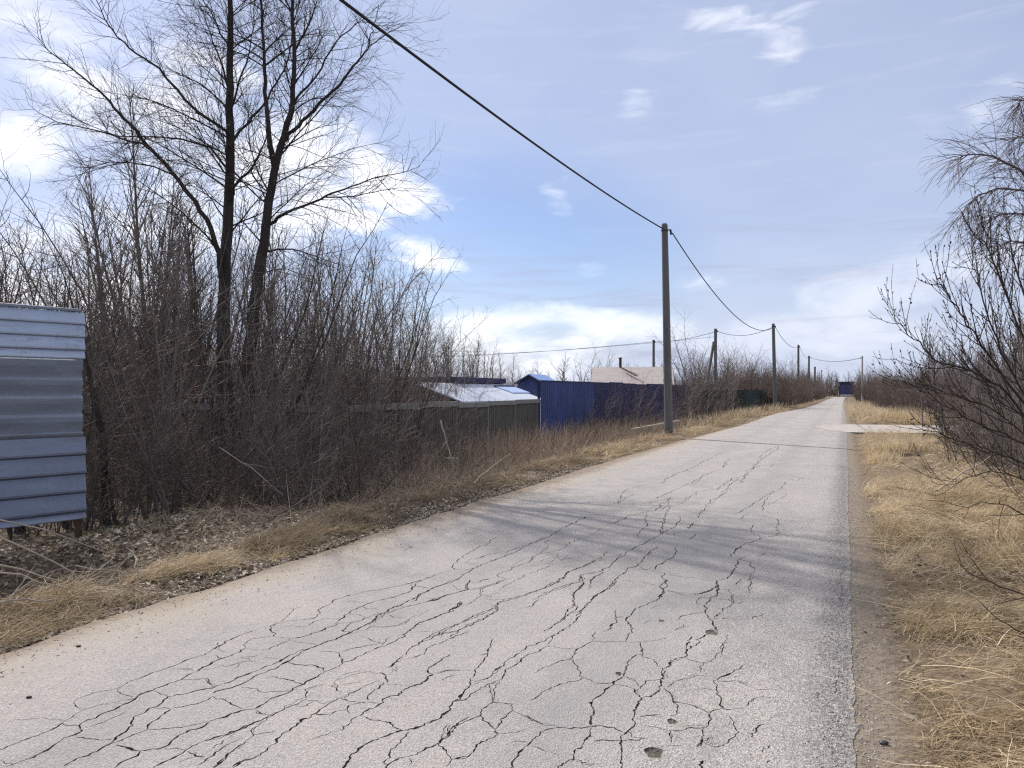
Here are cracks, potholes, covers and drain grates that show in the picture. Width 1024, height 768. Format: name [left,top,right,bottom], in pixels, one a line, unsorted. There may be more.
crack [511,547,775,768]
crack [614,439,800,589]
crack [1,517,610,768]
pothole [644,747,663,758]
